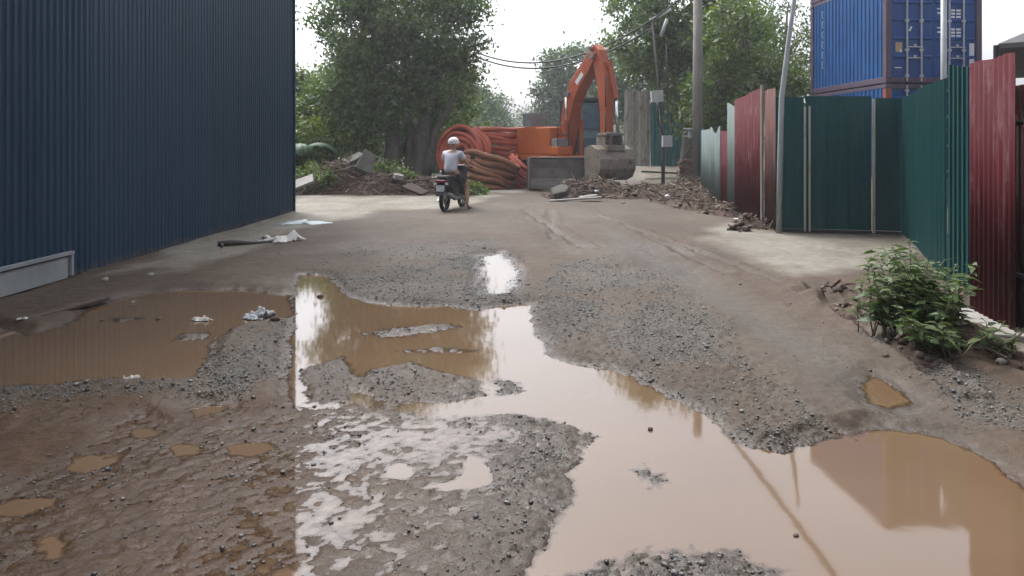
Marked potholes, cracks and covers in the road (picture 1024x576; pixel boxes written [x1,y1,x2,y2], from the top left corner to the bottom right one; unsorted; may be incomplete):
pothole [0,280,300,394]
pothole [141,433,219,468]
pothole [256,267,1024,576]
pothole [464,247,534,296]
